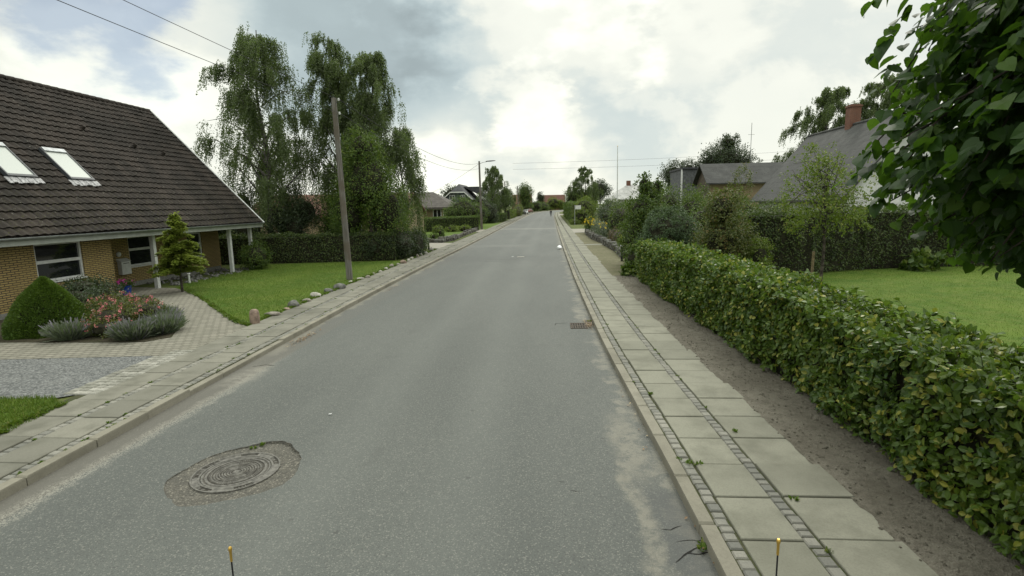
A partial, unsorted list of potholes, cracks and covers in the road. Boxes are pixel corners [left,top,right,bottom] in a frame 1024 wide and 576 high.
manhole cover [189,452,281,494]
